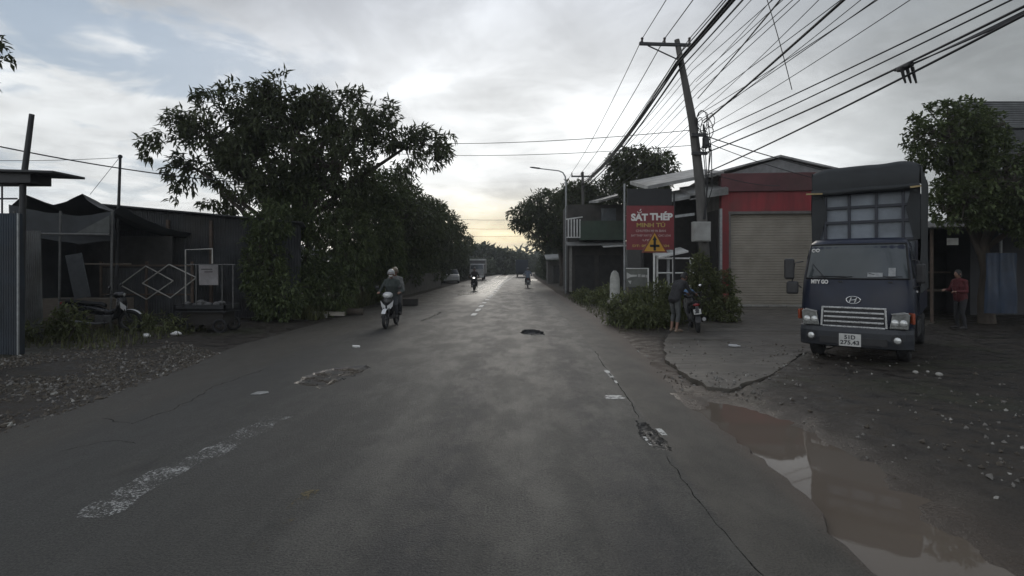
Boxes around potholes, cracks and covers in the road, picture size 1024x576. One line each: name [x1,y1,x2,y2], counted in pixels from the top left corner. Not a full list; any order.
crack [595,352,639,418]
pothole [635,420,672,451]
crack [63,370,261,451]
pothole [294,365,371,389]
